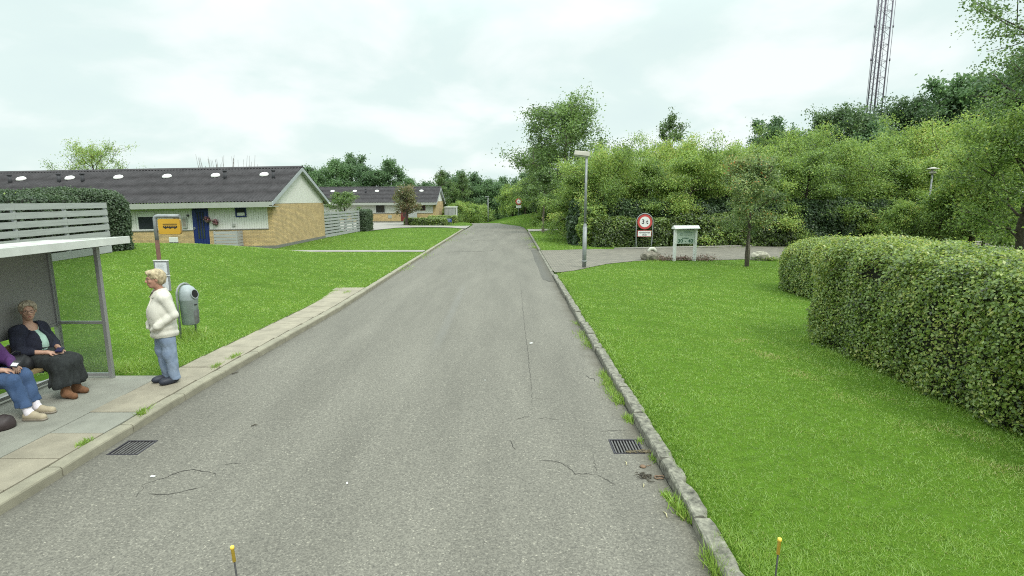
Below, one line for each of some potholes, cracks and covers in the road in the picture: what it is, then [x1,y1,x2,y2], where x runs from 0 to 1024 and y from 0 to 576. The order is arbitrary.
drain grate [608,439,652,454]
crack [136,463,238,497]
drain grate [106,440,158,455]
